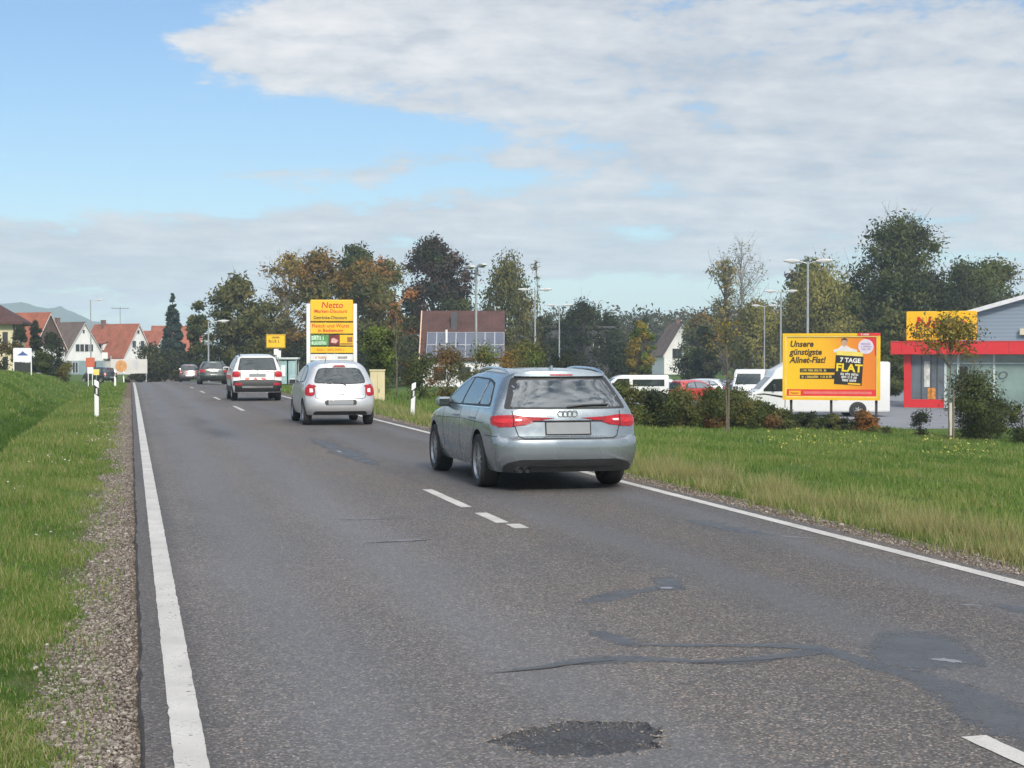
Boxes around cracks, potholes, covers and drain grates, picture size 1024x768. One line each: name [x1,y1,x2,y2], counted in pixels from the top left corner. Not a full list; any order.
pothole [468,717,675,759]
